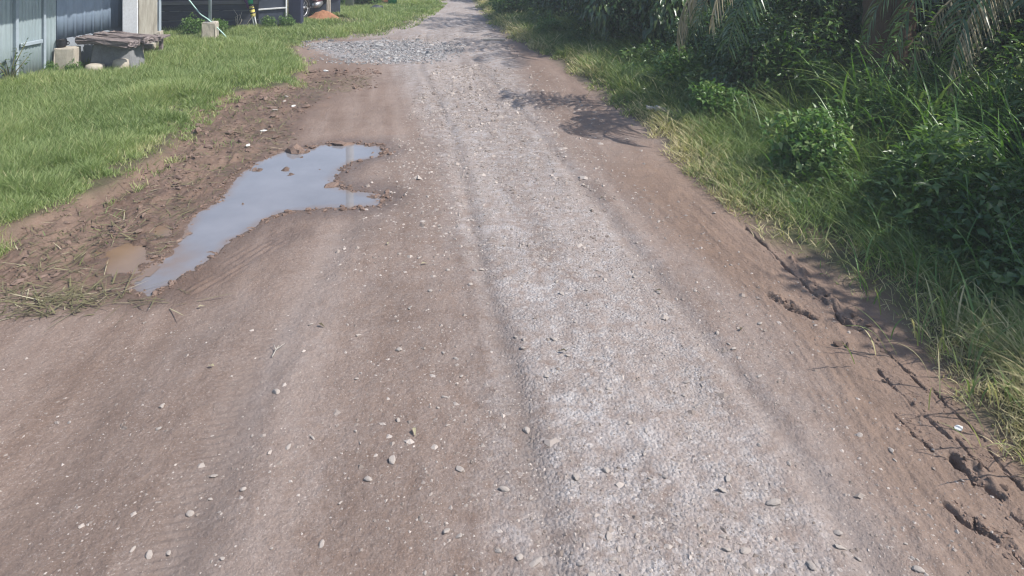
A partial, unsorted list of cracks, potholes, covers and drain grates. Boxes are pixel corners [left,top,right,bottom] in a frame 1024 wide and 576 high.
pothole [96,241,163,283]
pothole [122,143,392,300]
